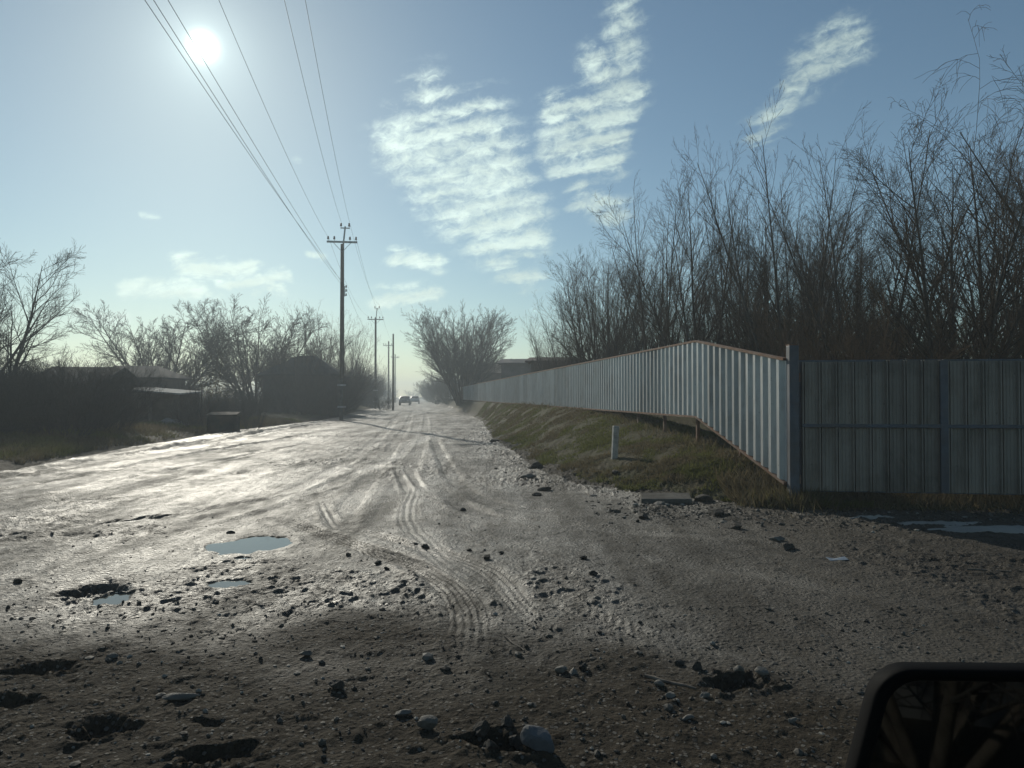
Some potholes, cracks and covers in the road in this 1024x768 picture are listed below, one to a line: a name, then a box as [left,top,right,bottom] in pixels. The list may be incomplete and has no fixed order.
pothole [199,534,299,555]
pothole [171,738,266,765]
pothole [43,579,135,601]
pothole [57,711,148,742]
pothole [86,589,138,606]
pothole [696,668,786,694]
pothole [203,577,253,588]
pothole [441,725,543,753]
pothole [0,691,51,709]
pothole [0,657,86,676]
